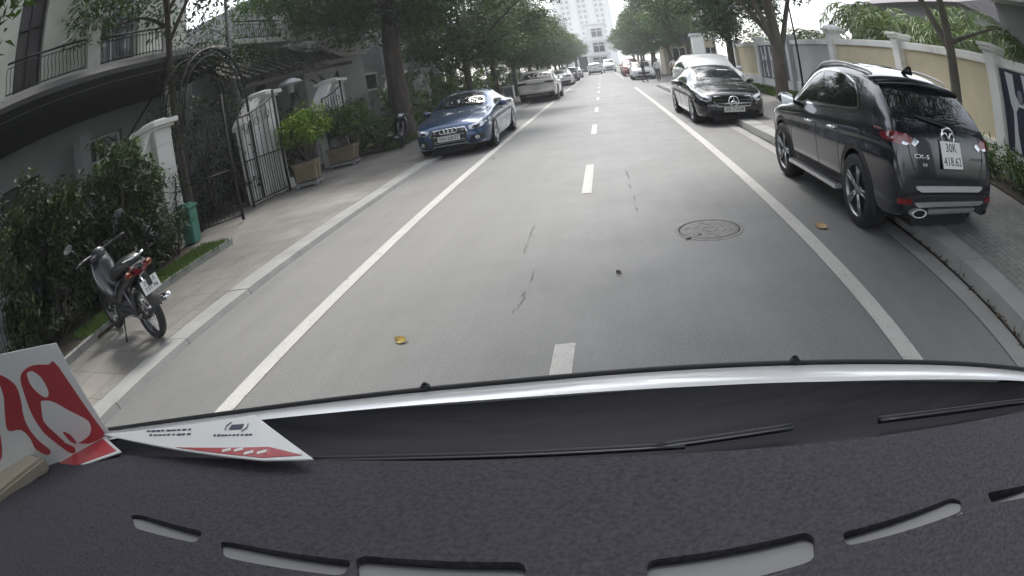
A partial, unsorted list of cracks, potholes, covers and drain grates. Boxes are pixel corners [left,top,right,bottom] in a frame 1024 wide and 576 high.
manhole cover [675,219,745,241]
